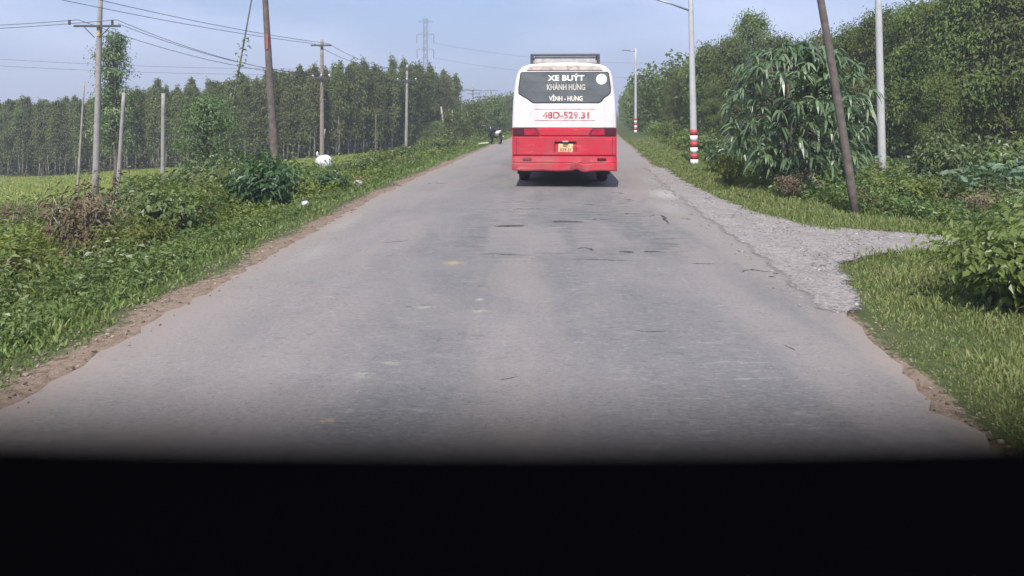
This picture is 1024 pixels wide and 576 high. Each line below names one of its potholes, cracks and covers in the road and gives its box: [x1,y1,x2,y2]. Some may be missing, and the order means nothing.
crack [586,192,691,224]
